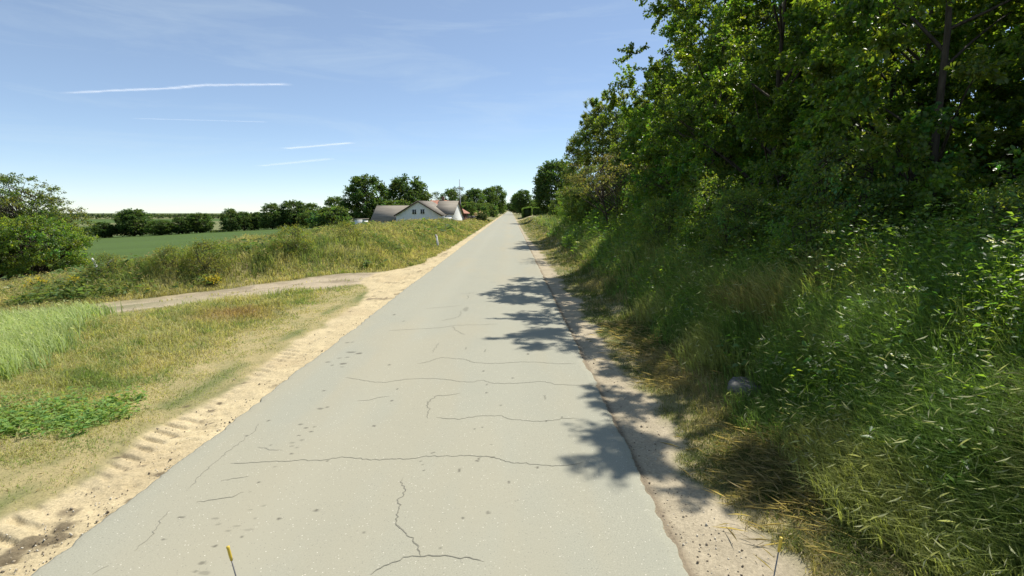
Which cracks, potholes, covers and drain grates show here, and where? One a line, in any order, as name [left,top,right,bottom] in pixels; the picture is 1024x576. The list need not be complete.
crack [374,480,484,572]
crack [352,293,593,421]
crack [190,424,583,502]
